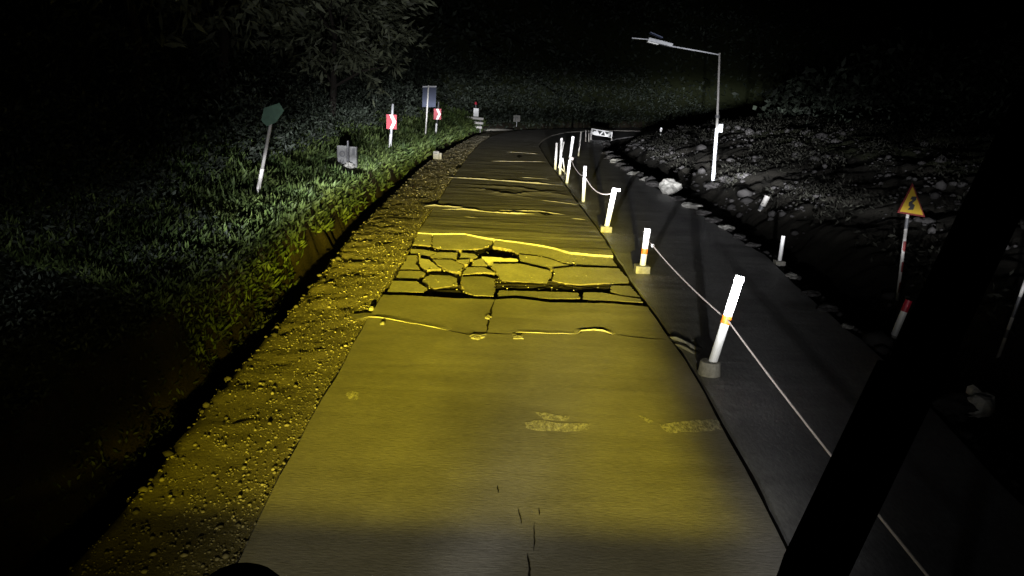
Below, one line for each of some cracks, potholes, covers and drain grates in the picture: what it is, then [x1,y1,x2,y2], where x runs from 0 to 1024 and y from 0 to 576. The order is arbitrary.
crack [518,509,540,576]
crack [349,150,788,549]
pothole [476,245,519,257]
